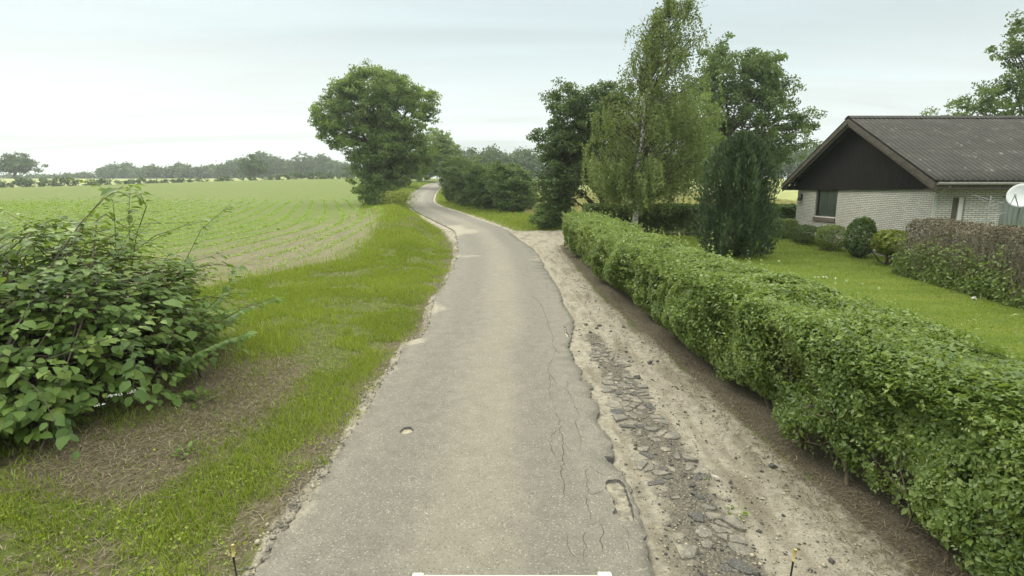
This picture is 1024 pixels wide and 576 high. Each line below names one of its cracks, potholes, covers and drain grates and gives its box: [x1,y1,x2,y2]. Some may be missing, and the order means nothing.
crack [533,283,613,564]
pothole [605,479,634,522]
